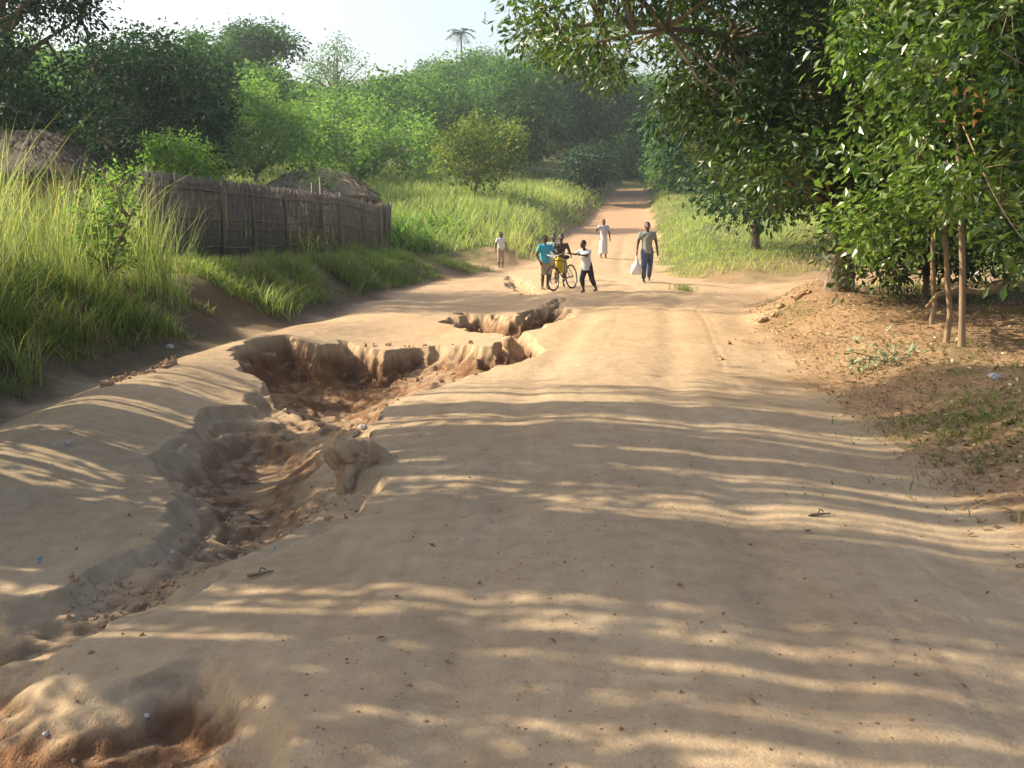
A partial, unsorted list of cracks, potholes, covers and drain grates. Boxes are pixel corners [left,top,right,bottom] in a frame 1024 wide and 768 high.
pothole [0,659,291,768]
